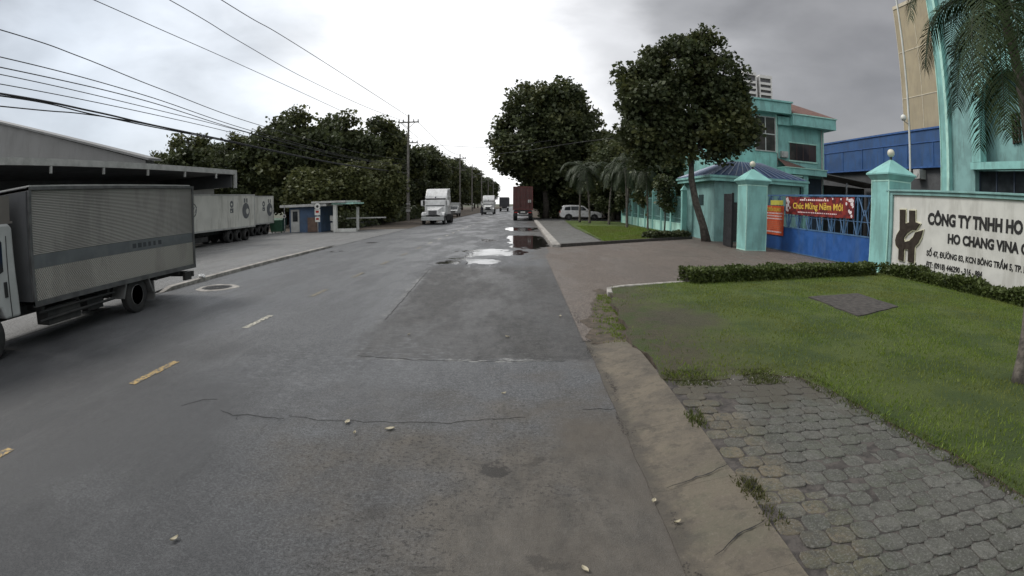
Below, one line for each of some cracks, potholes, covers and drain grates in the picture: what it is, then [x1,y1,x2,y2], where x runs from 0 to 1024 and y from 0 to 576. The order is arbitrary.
utility cover [808,293,898,317]
crack [181,399,516,424]
crack [714,519,765,556]
